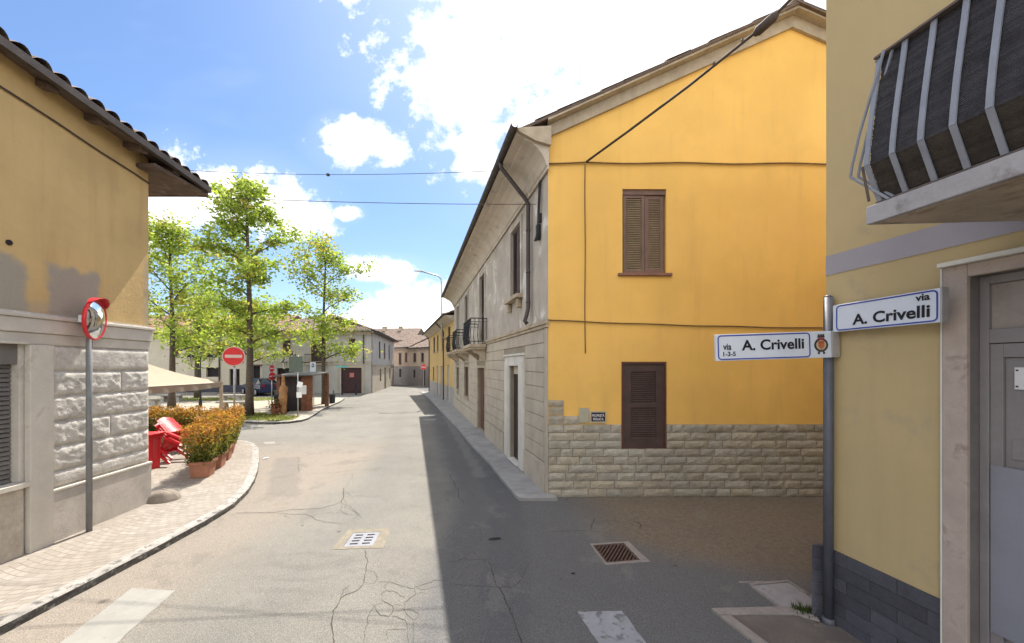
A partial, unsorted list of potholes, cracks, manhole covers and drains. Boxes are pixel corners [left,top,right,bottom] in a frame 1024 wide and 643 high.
drain grate [590,541,650,565]
crack [331,551,437,643]
drain grate [332,528,391,550]
crack [259,457,388,523]
